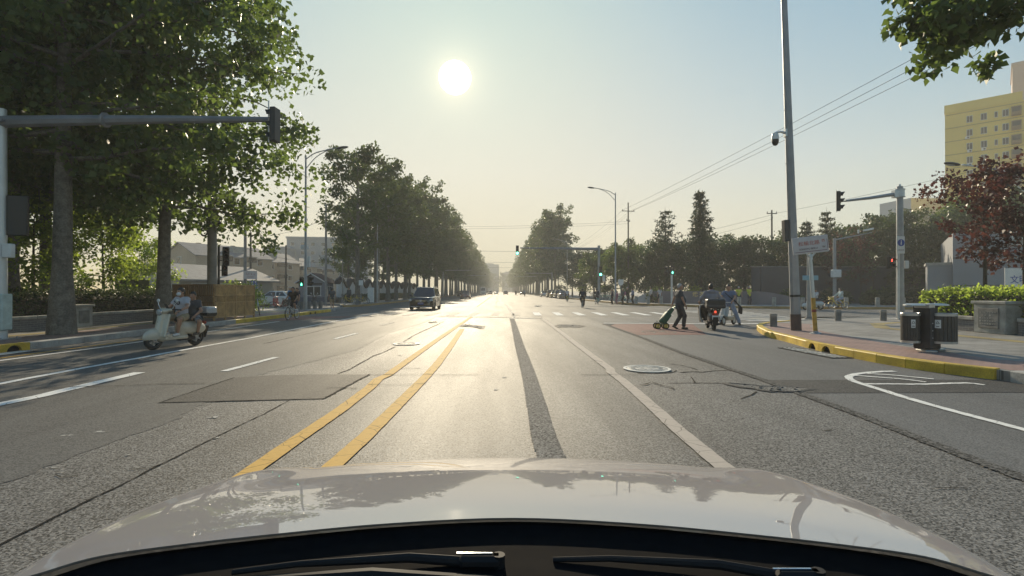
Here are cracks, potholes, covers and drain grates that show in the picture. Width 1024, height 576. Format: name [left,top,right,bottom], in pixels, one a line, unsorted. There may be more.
crack [640,364,732,389]
drain grate [778,347,853,358]
